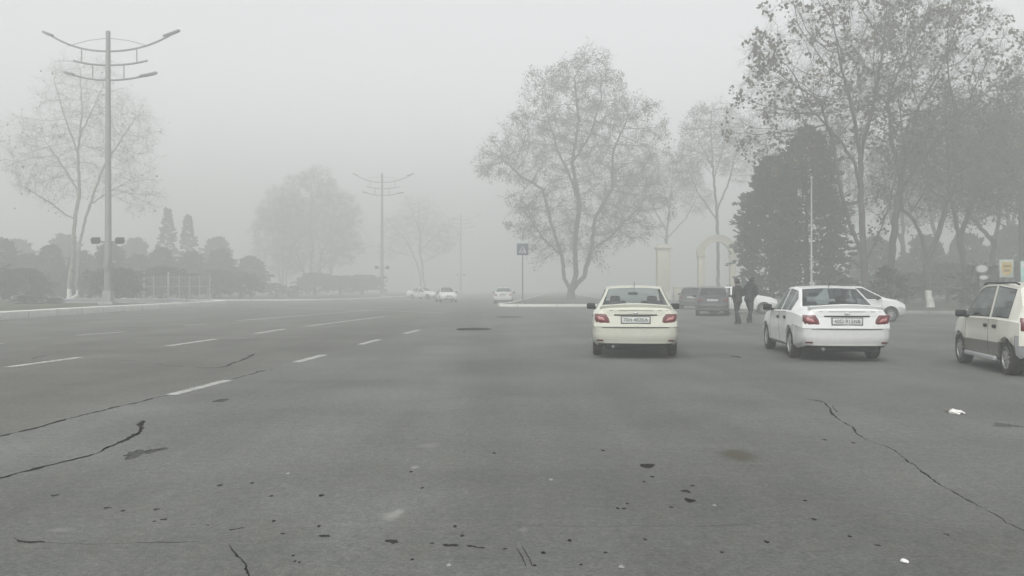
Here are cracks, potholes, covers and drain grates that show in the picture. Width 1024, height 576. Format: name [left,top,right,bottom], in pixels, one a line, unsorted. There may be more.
pothole [123,447,168,460]
crack [809,399,1024,531]
crack [131,354,255,368]
crack [193,524,532,576]
crack [0,420,145,479]
